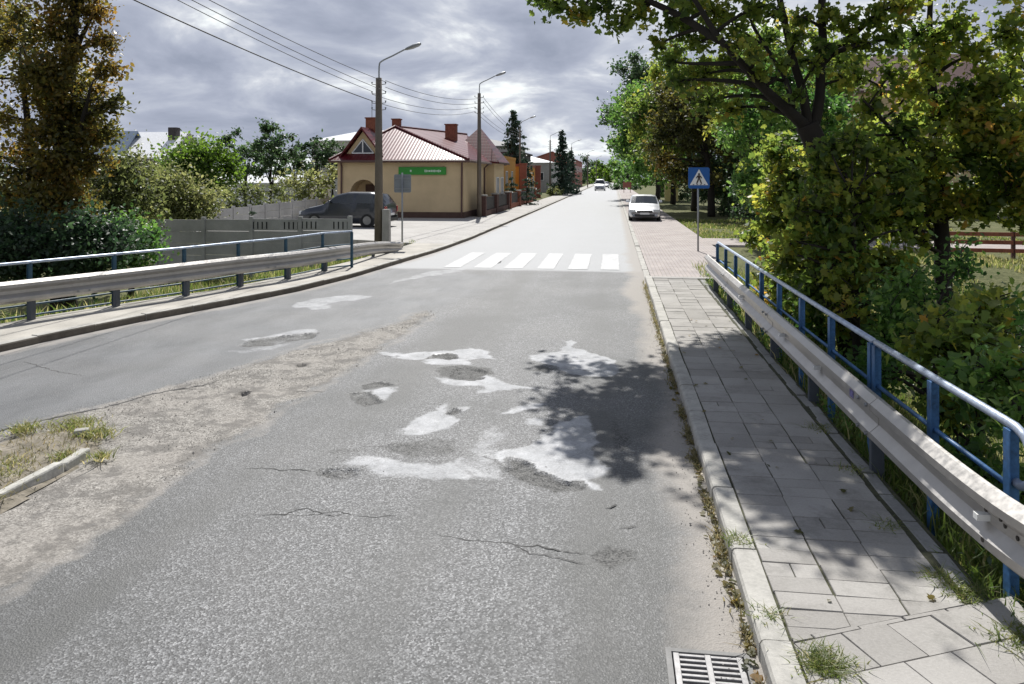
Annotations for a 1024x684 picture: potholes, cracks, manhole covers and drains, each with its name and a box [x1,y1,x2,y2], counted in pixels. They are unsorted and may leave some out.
drain grate [665,647,757,684]
pothole [362,381,395,390]
crack [437,534,589,563]
pothole [449,367,488,381]
crack [262,508,402,518]
pothole [347,392,382,407]
pothole [494,458,586,493]
pothole [242,332,319,347]
pothole [316,467,360,479]
